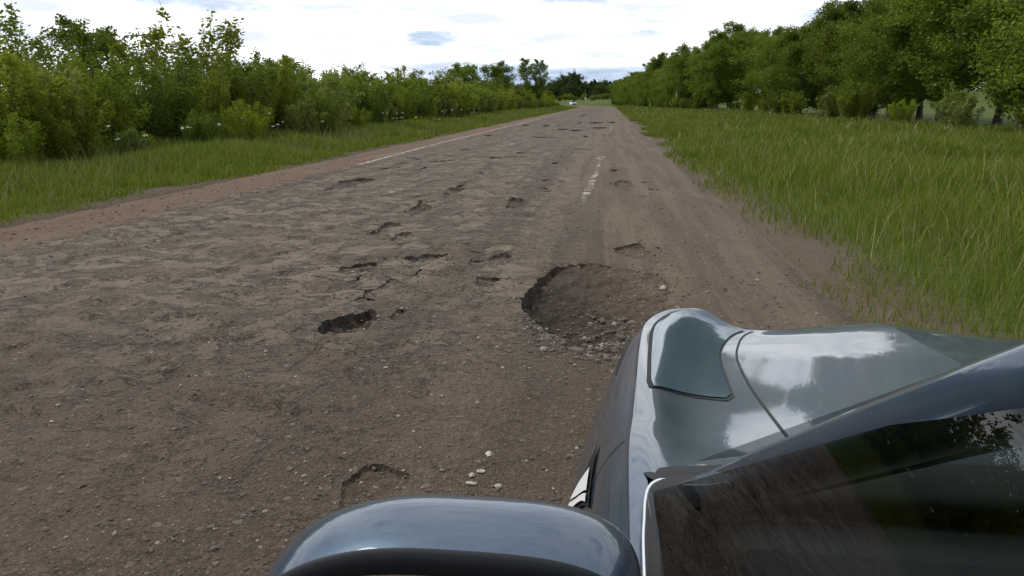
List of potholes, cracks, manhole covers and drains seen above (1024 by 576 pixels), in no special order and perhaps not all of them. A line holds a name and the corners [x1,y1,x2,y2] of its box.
pothole [505,197,526,209]
pothole [614,180,632,191]
pothole [399,200,433,216]
pothole [322,178,375,191]
pothole [476,277,500,288]
pothole [614,243,646,259]
pothole [317,309,377,335]
pothole [366,222,402,236]
pothole [443,184,464,198]
pothole [404,253,448,268]
pothole [339,464,411,509]
pothole [337,262,378,275]
